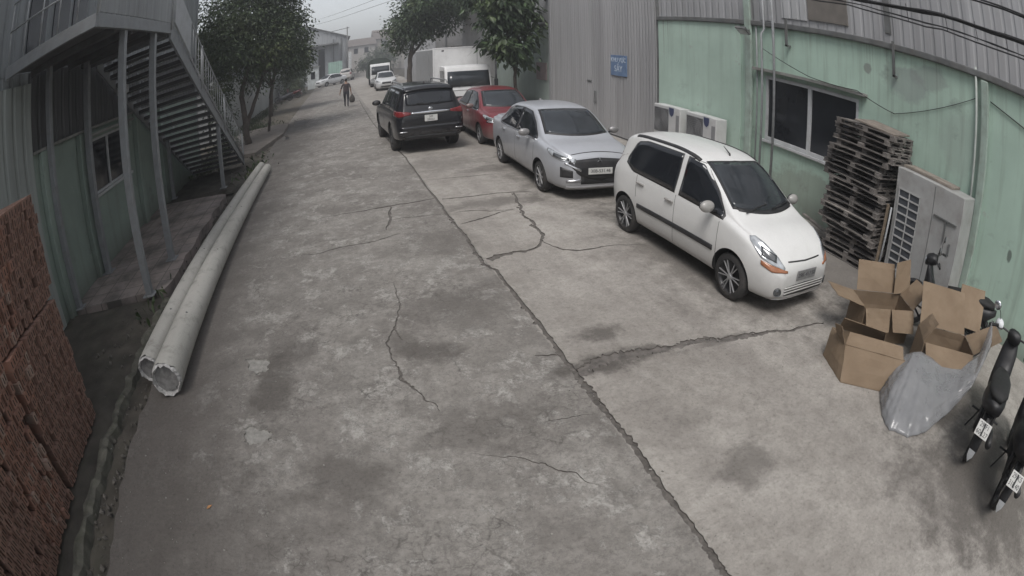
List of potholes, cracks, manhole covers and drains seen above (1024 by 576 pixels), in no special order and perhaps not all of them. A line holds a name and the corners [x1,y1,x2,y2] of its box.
crack [479,454,594,484]
crack [309,193,641,261]
crack [535,323,823,376]
crack [385,284,439,410]
